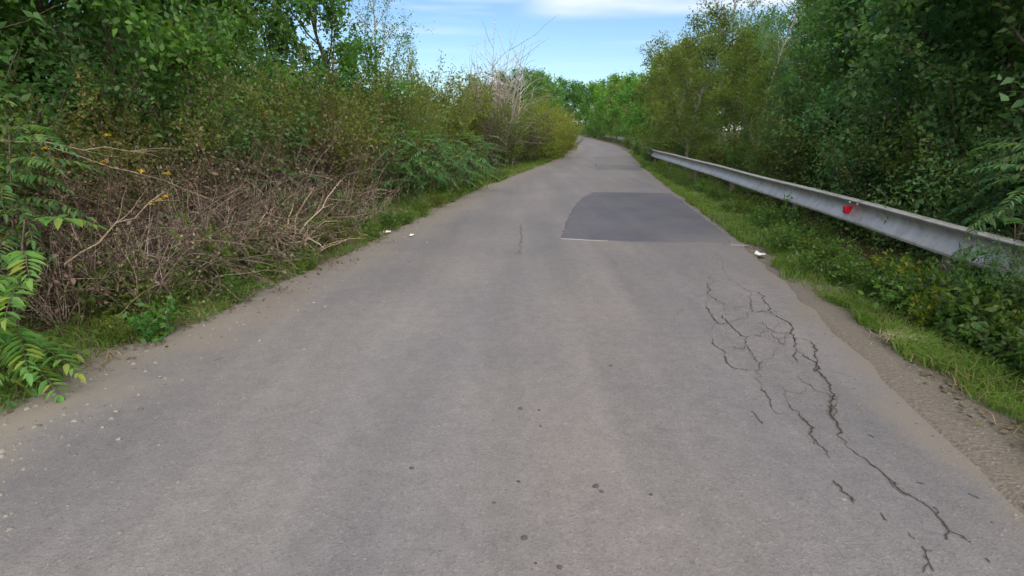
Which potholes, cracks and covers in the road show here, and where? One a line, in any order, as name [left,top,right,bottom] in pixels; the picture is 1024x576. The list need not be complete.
crack [677,257,980,573]
